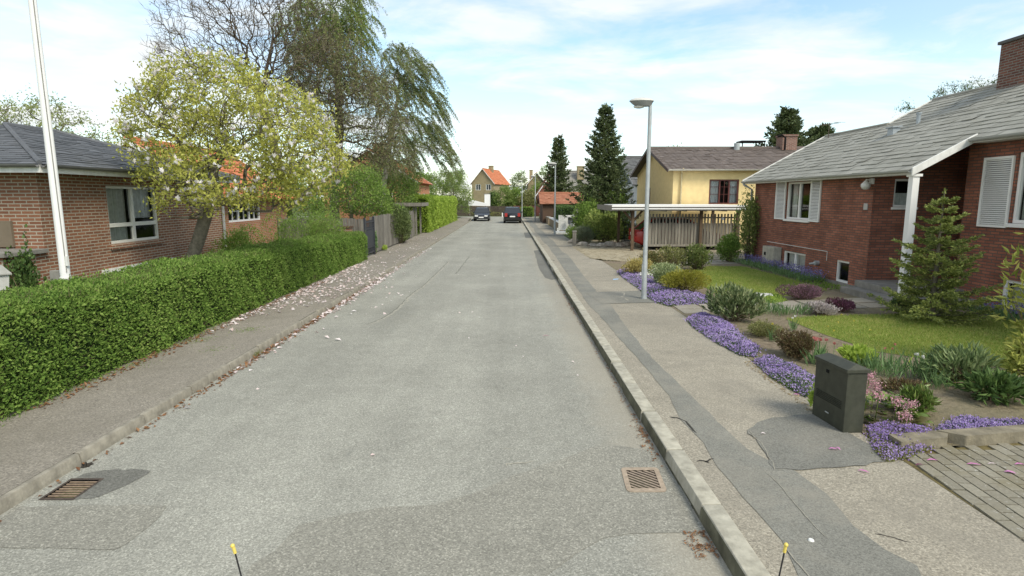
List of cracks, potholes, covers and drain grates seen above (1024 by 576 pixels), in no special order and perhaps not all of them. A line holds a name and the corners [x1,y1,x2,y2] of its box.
drain grate [38,478,104,500]
drain grate [621,467,666,492]
